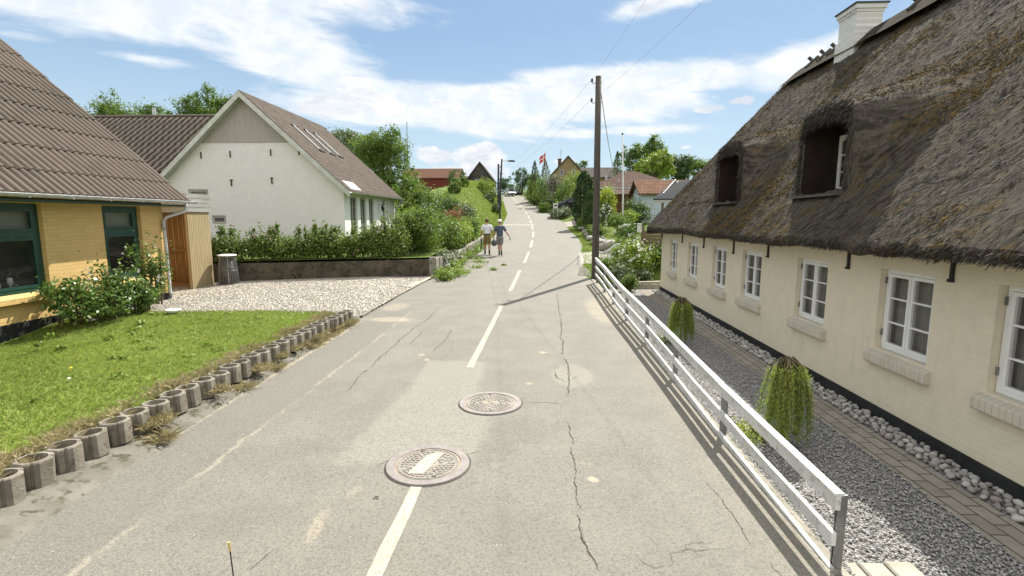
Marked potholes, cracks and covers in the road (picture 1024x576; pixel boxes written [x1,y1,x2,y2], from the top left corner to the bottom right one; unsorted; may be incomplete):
manhole cover [384,445,471,487]
crack [547,294,570,404]
manhole cover [458,392,523,415]
crack [569,426,599,570]
